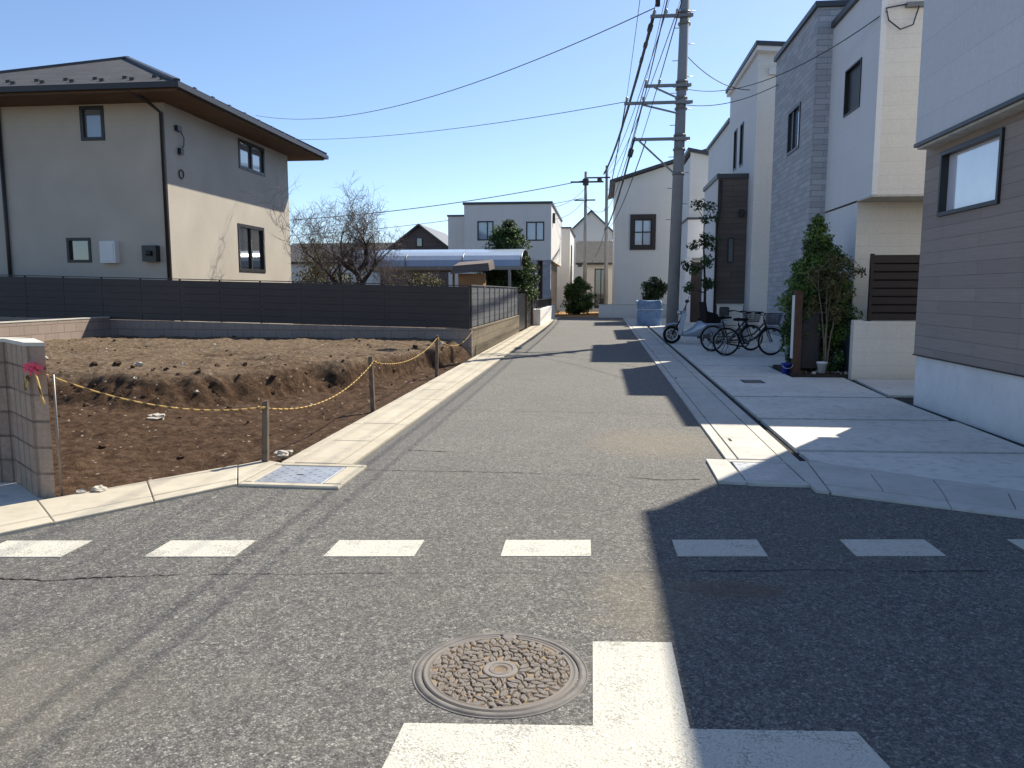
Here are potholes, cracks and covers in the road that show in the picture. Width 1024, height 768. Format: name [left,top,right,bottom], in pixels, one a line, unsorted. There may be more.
manhole cover [412,632,588,719]
